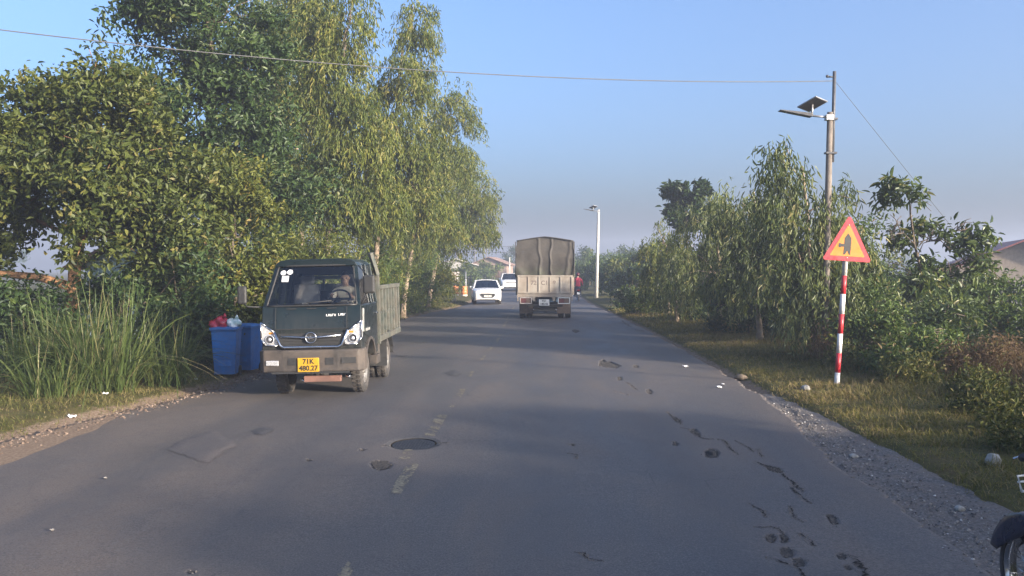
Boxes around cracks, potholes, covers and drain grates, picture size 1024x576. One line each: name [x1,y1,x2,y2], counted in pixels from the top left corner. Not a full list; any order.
manhole cover [386,437,442,450]
pothole [371,460,392,471]
crack [849,555,871,576]
crack [666,412,817,546]
crack [765,556,813,576]
pothole [599,359,620,368]
